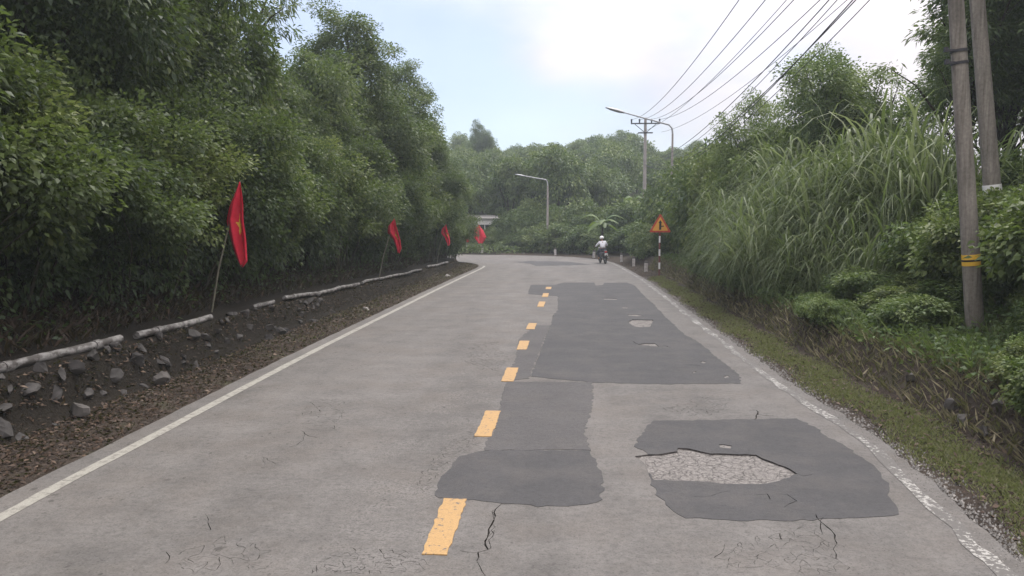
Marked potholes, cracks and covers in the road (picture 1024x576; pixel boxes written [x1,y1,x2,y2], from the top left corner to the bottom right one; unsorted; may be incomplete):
crack [463,506,499,571]
pothole [635,448,797,484]
crack [179,517,268,570]
crack [715,516,850,574]
